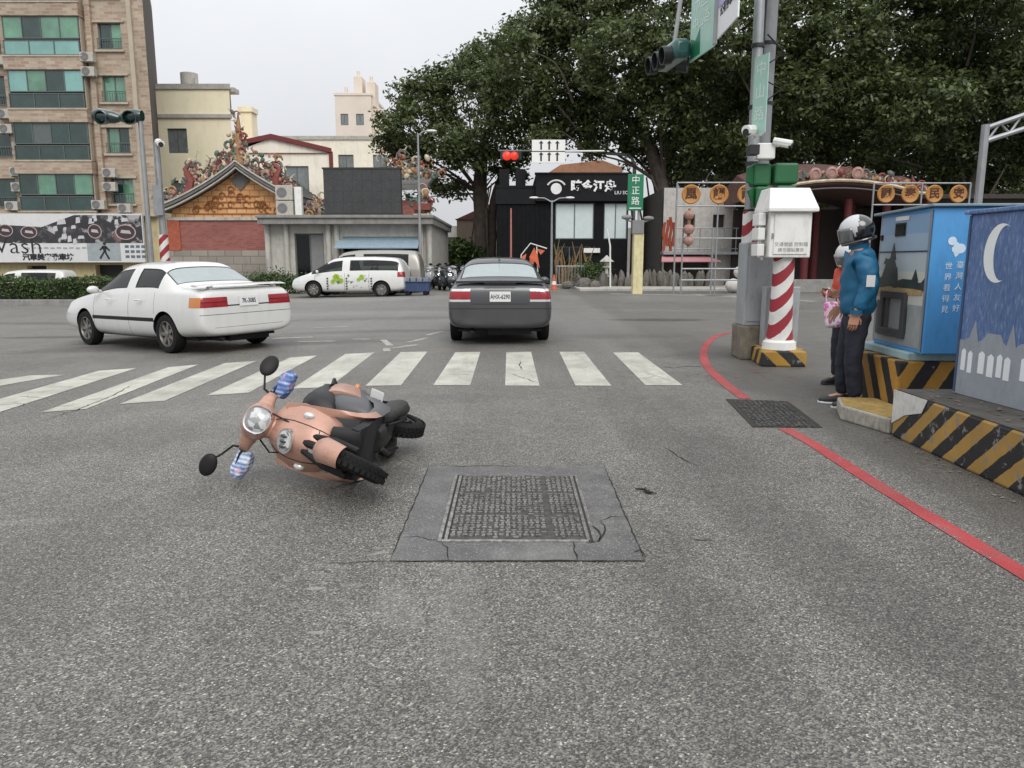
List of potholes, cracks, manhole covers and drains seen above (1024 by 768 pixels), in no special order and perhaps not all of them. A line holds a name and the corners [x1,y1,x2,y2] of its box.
manhole cover [437,474,597,542]
crack [573,516,623,560]
